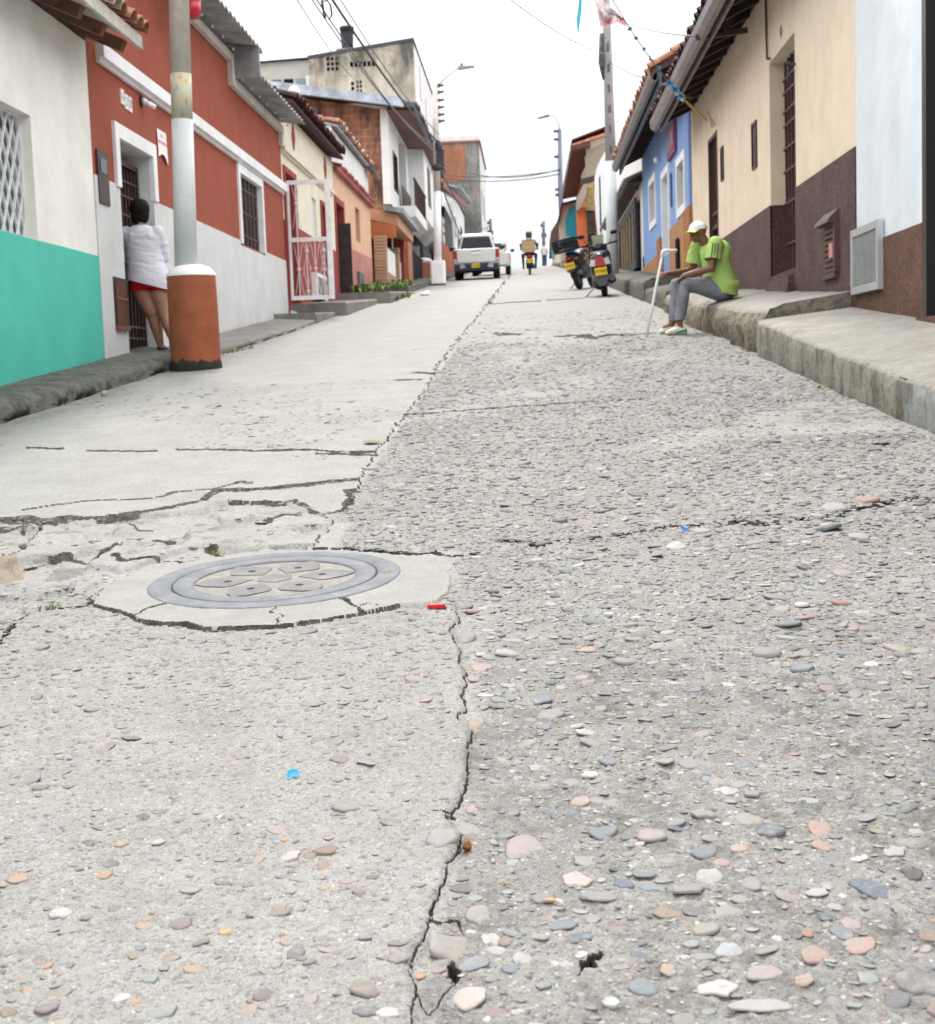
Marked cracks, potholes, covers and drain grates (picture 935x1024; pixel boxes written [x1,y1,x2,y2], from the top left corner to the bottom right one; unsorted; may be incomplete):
crack [0,478,361,602]
manhole cover [94,548,451,631]
crack [0,594,400,645]
crack [408,607,473,1024]
crack [393,371,437,381]
pothole [577,950,604,977]
pothole [446,960,463,986]
crack [313,496,935,557]
